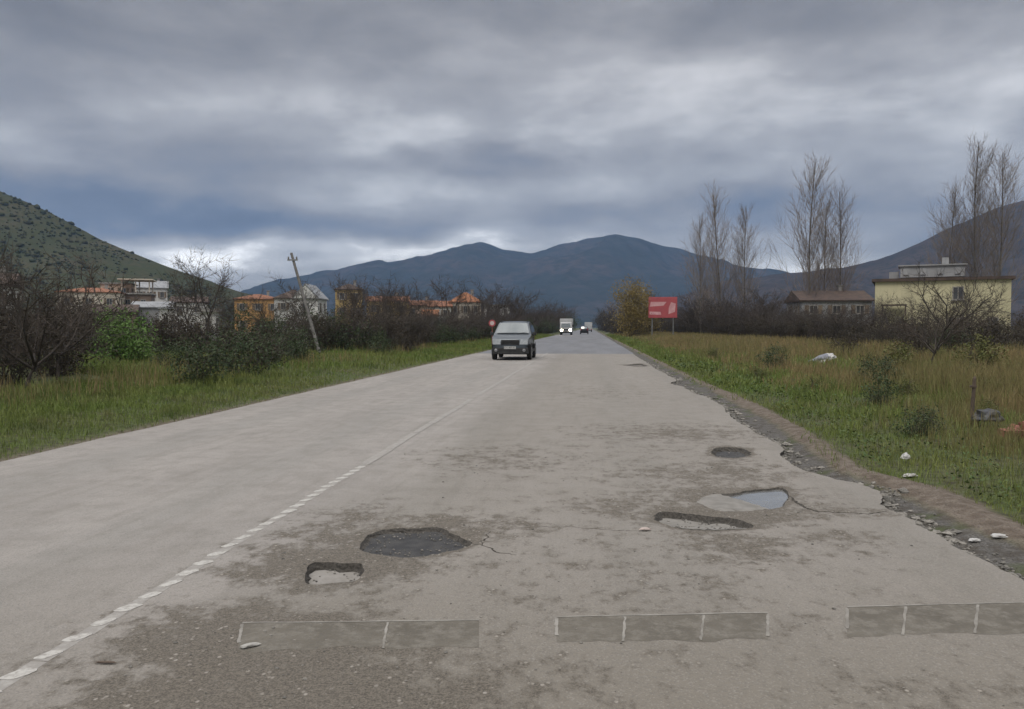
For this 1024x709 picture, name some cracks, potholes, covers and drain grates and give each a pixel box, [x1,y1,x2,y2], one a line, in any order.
pothole [359,527,473,558]
pothole [305,562,364,585]
pothole [654,512,754,531]
pothole [711,447,751,458]
pothole [697,487,790,511]
